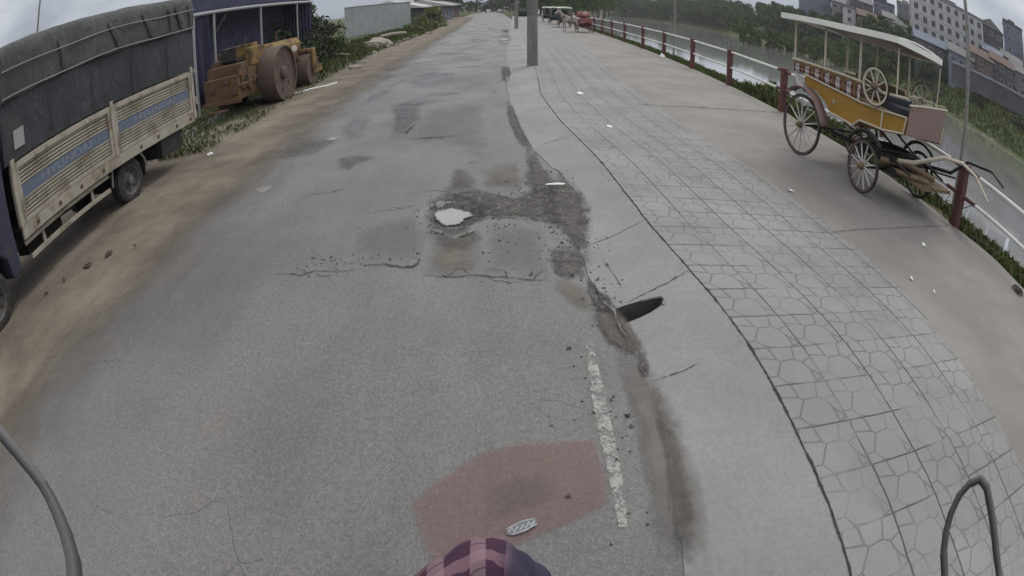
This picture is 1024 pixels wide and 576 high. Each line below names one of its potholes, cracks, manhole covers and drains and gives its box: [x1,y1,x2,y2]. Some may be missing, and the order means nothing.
pothole [430,194,486,234]
crack [276,259,553,283]
